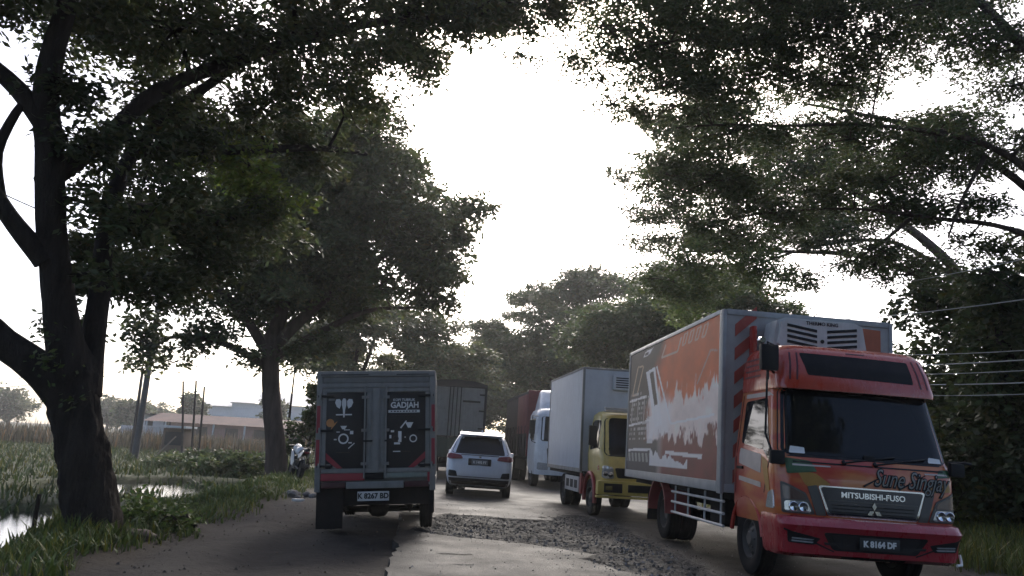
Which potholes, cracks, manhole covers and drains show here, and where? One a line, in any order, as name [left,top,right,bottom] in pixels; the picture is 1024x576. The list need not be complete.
pothole [416,513,717,576]
